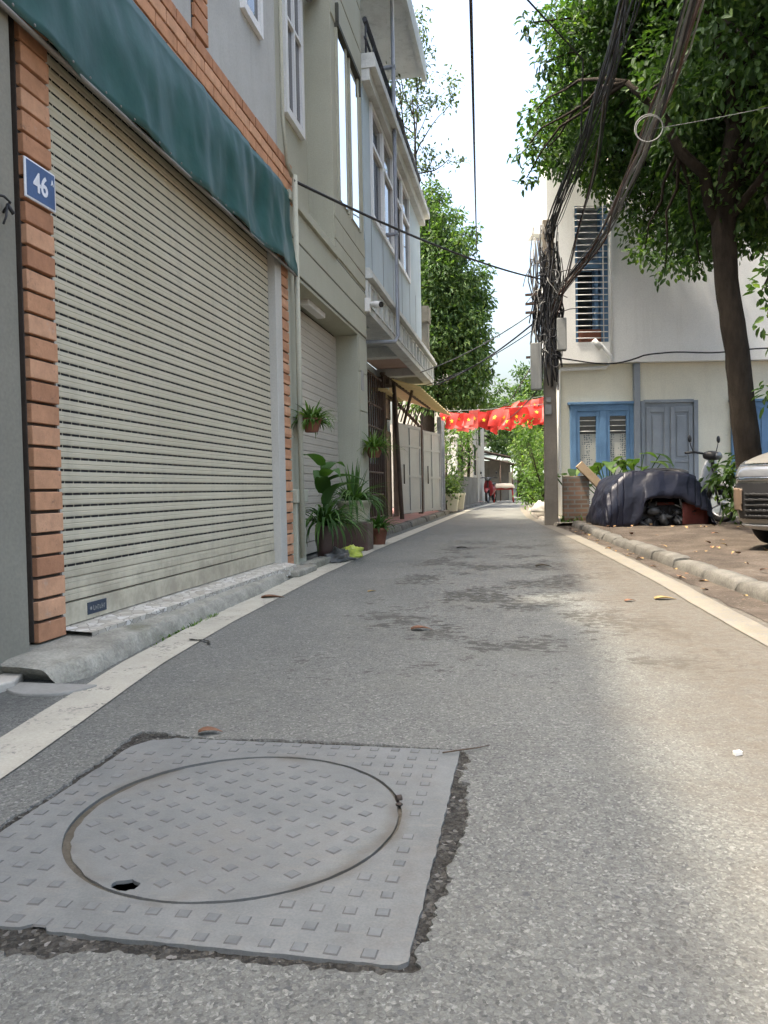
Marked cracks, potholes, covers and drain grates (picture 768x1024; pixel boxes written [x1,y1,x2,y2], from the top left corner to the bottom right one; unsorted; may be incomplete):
manhole cover [0,738,460,970]
